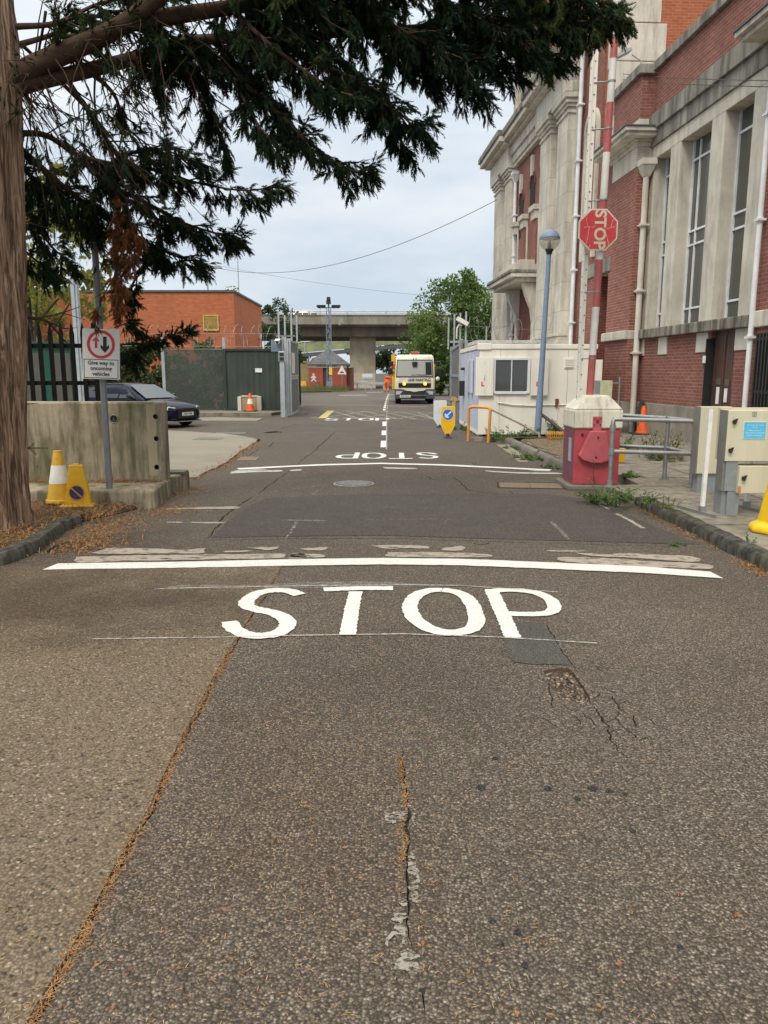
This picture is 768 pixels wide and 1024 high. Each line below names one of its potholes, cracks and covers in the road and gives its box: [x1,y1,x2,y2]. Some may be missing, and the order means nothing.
crack [537,626,655,758]
pothole [543,668,591,704]
